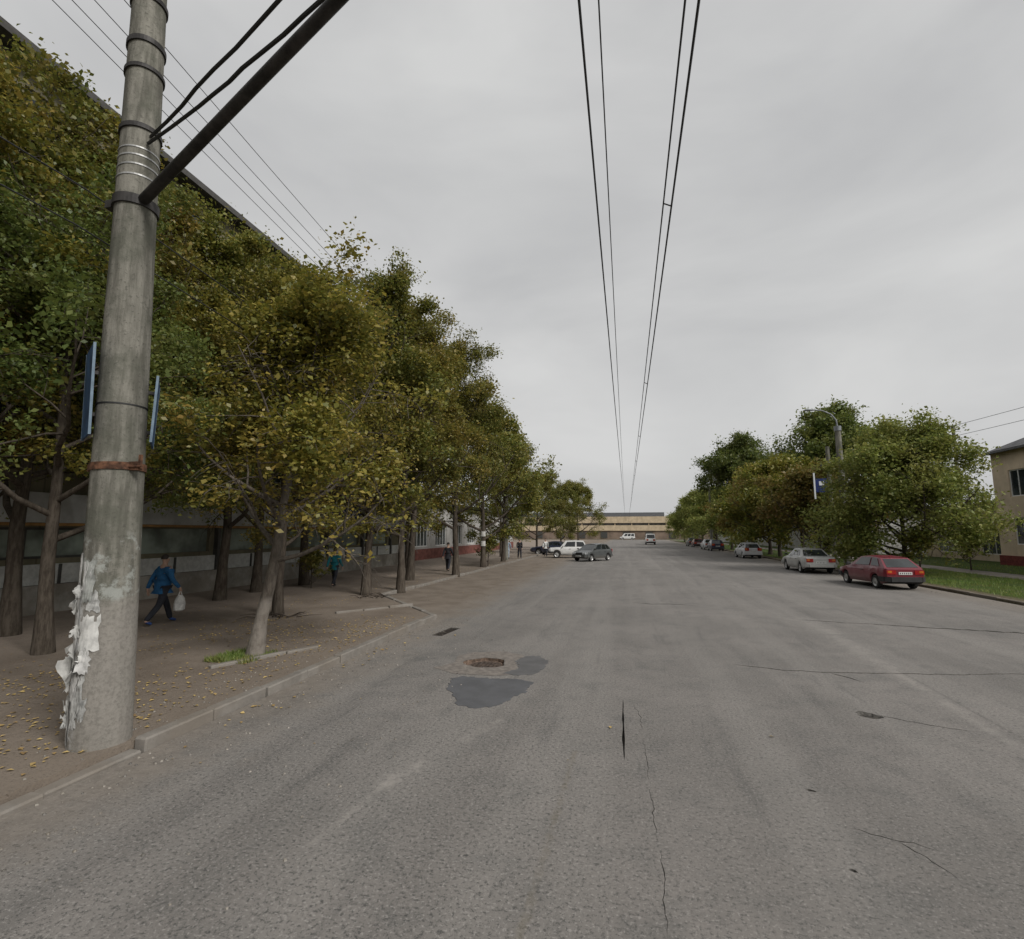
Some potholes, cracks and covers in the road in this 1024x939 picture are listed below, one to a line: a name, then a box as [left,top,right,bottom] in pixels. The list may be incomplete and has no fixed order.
crack [858,829,958,879]
crack [810,620,1024,634]
pothole [855,711,884,719]
crack [732,664,1012,682]
